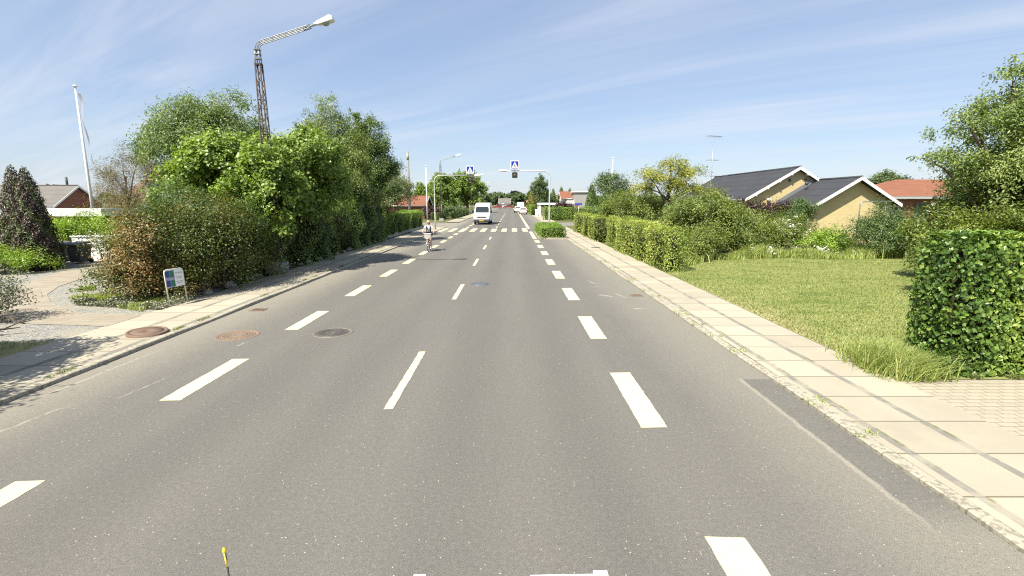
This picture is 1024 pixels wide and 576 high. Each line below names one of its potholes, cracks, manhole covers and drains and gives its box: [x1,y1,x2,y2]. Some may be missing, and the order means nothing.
manhole cover [312,327,353,338]
manhole cover [125,326,169,338]
manhole cover [214,330,260,341]
